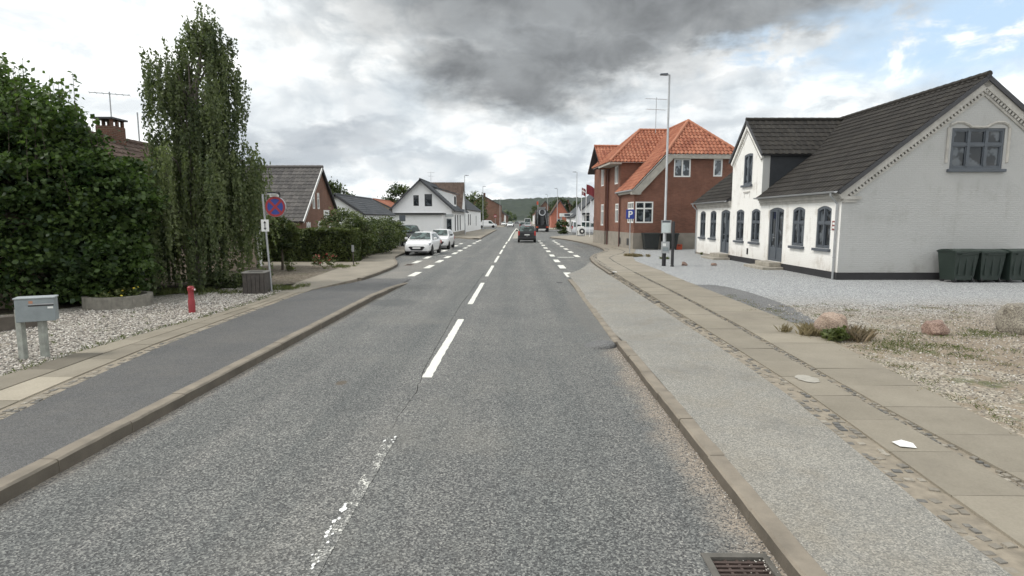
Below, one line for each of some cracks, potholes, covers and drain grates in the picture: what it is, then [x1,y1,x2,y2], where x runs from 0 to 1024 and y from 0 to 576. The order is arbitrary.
drain grate [700,553,782,576]
